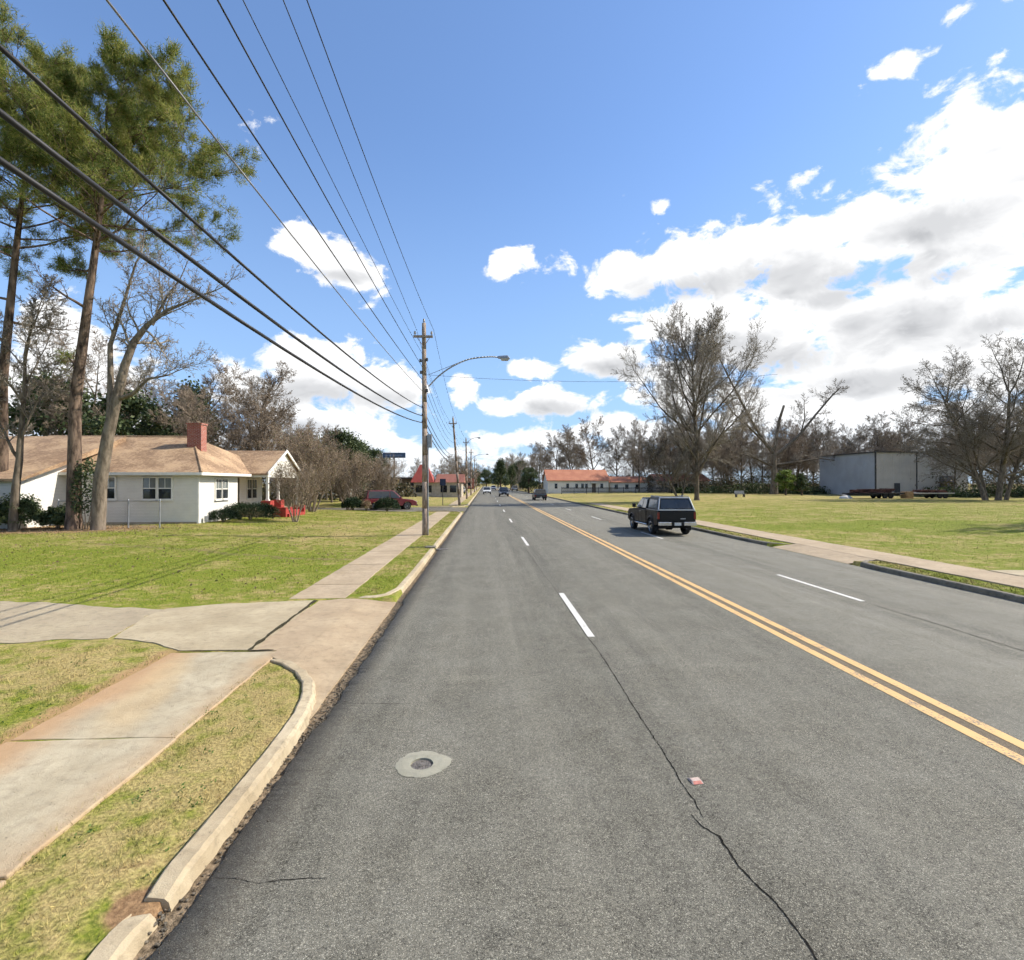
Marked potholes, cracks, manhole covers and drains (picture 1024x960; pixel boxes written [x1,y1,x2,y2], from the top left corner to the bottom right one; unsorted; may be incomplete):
crack [223,866,371,883]
crack [527,551,818,960]
manhole cover [395,751,452,778]
